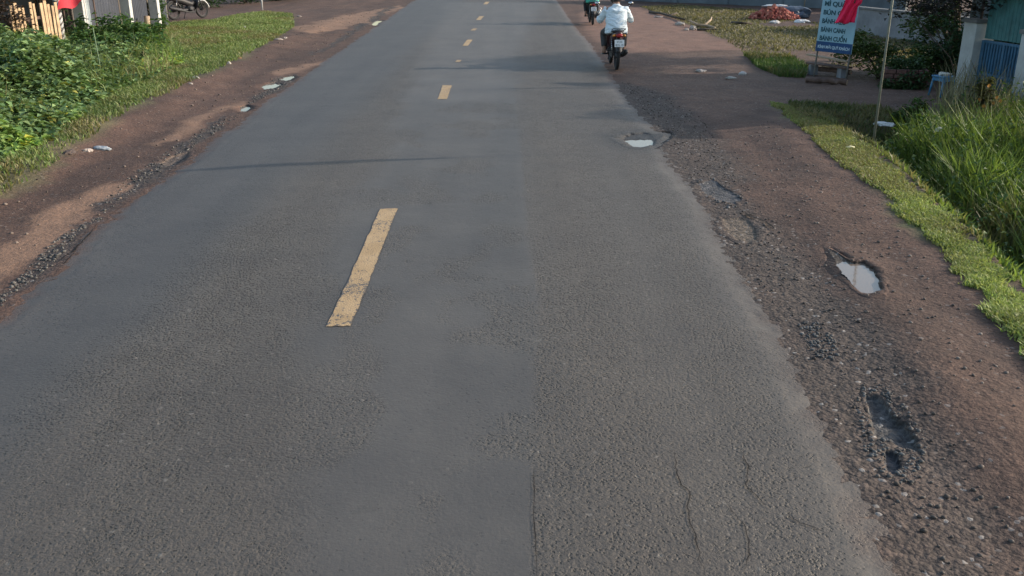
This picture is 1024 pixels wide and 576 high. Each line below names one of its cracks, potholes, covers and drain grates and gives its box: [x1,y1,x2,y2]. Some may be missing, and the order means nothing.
pothole [228,103,262,114]
pothole [868,443,918,482]
crack [727,453,761,570]
pothole [854,387,931,459]
pothole [269,74,304,85]
crack [674,450,705,575]
pothole [608,130,671,150]
pothole [713,214,768,247]
pothole [689,177,750,208]
pothole [823,245,889,298]
pothole [248,80,294,92]
